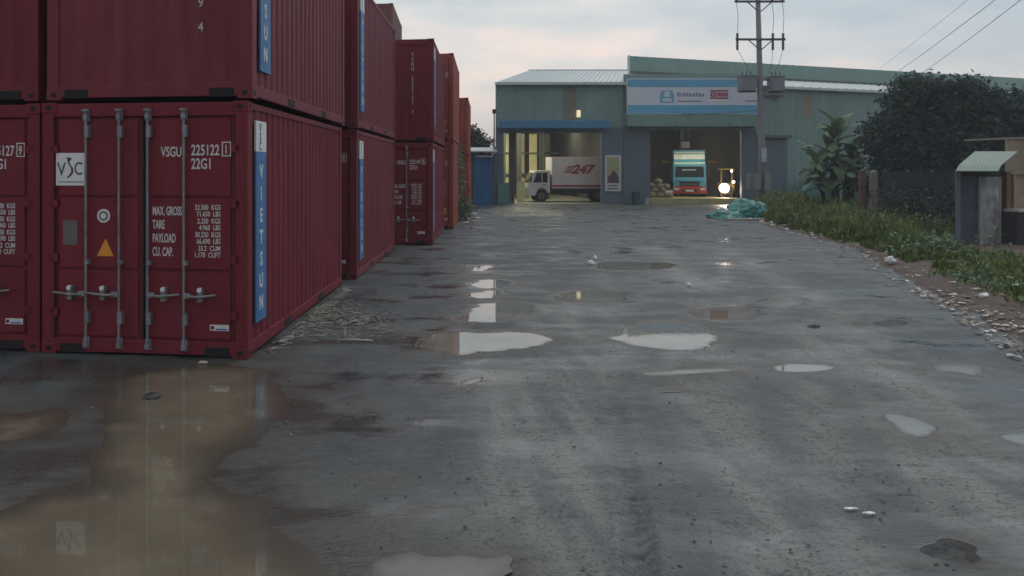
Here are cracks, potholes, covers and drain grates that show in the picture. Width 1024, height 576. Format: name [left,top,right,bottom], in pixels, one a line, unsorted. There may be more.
pothole [919,538,983,564]
pothole [459,377,483,385]
